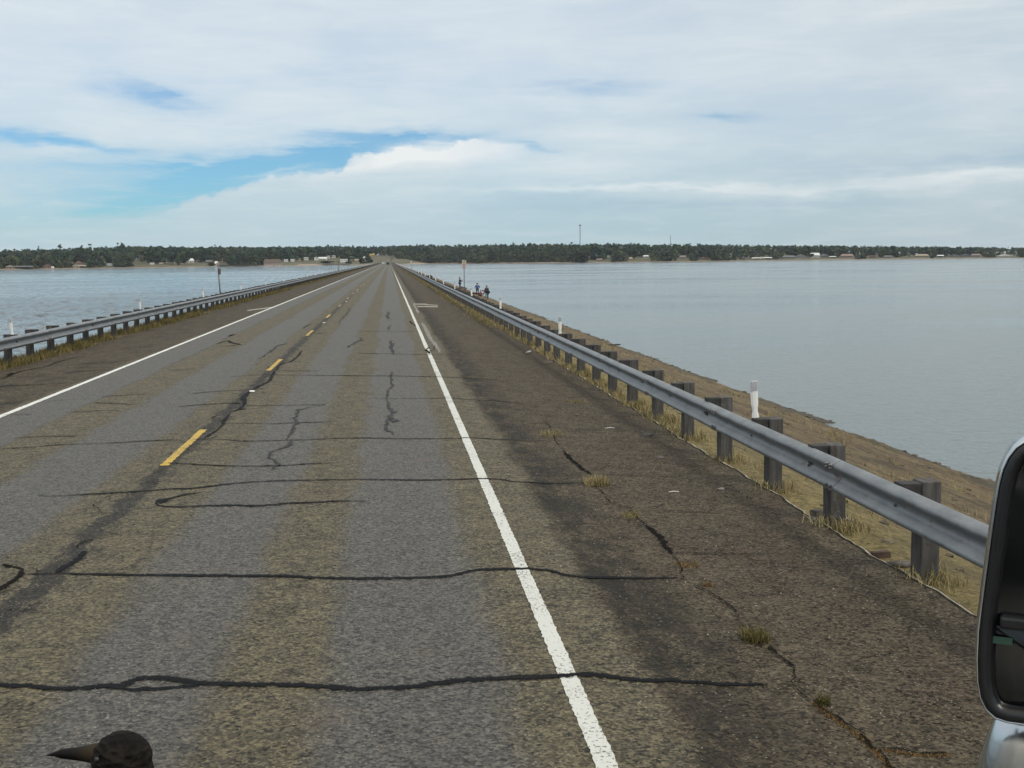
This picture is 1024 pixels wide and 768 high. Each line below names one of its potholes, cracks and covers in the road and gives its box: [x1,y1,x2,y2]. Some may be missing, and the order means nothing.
crack [0,333,544,611]
